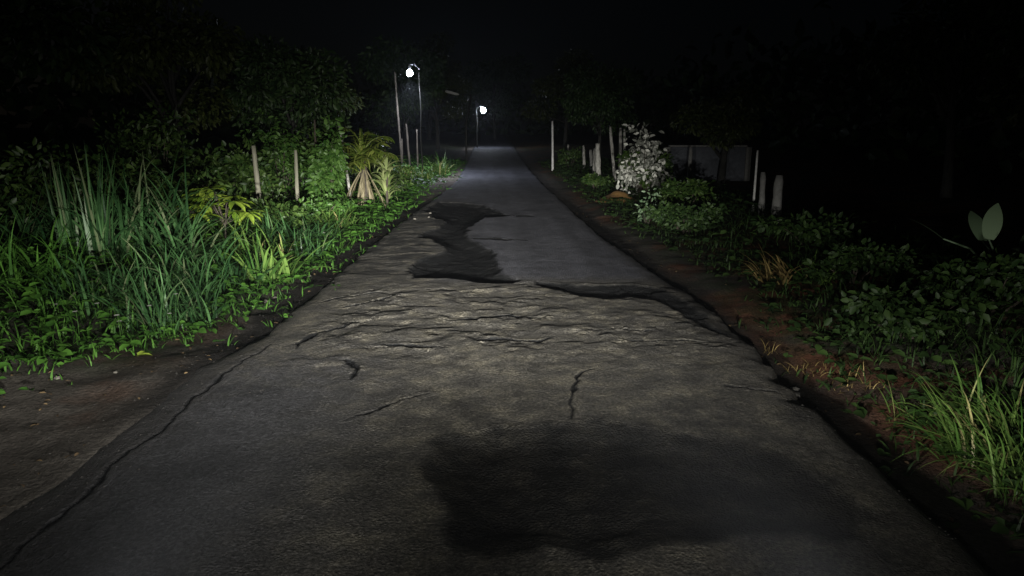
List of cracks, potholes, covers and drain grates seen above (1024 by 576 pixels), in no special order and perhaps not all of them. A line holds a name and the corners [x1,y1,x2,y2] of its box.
crack [561,365,602,422]
crack [0,290,558,576]
crack [593,326,713,344]
